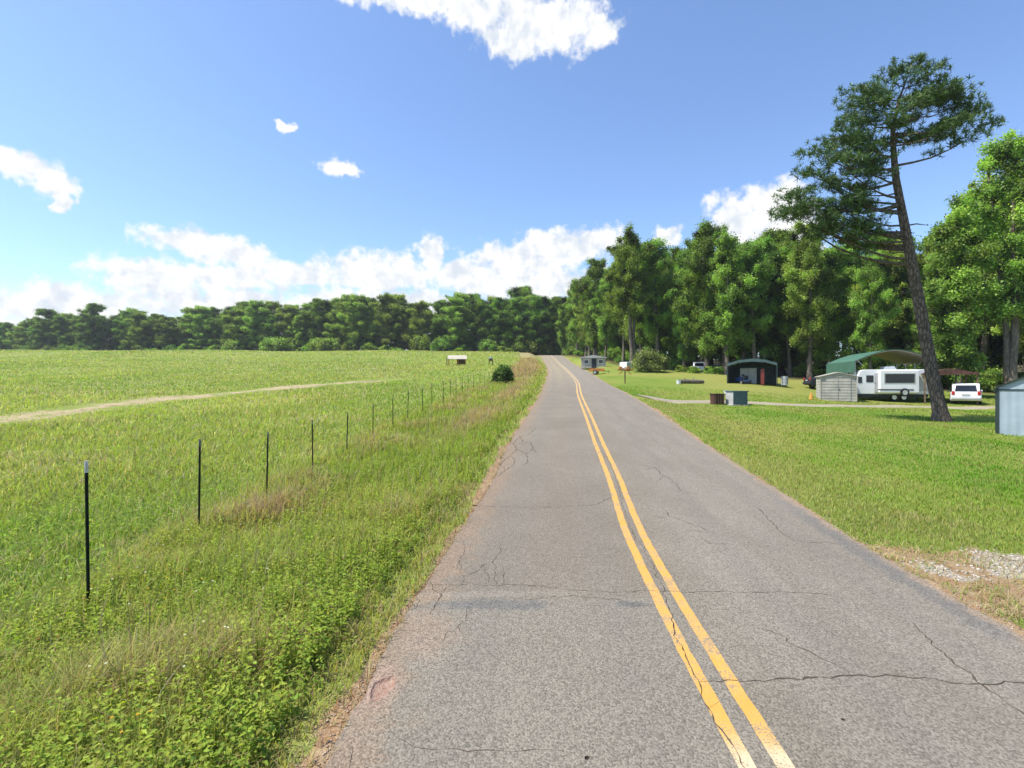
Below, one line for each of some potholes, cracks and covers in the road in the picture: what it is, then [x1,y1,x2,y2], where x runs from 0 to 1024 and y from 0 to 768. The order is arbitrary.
crack [474,462,1024,767]
crack [499,429,538,476]
crack [398,738,563,752]
crack [415,546,505,642]
